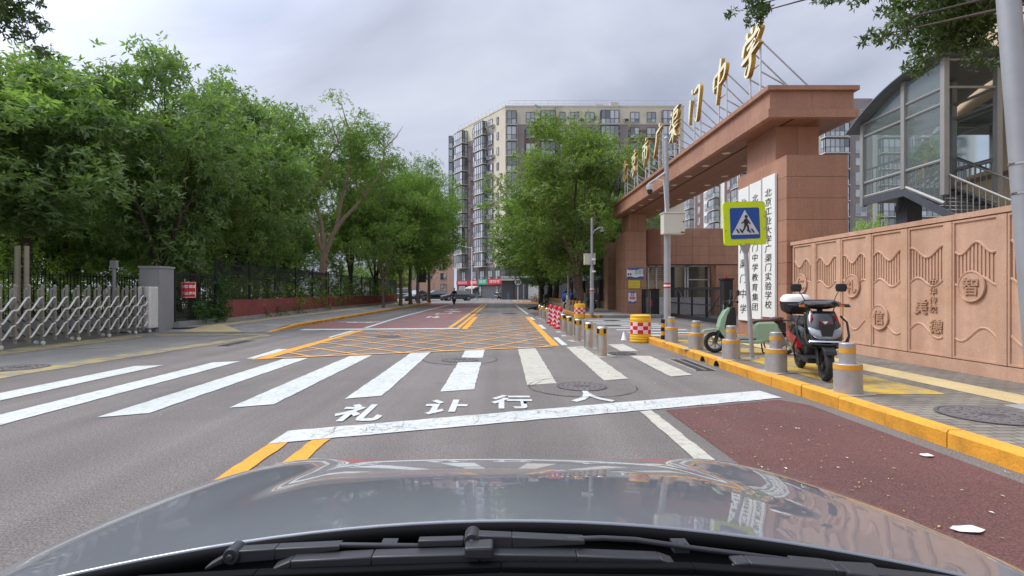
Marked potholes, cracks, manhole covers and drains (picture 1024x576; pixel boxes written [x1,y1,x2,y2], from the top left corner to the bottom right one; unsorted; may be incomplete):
manhole cover [557,382,607,391]
manhole cover [933,405,1024,425]
drain grate [668,359,717,371]
